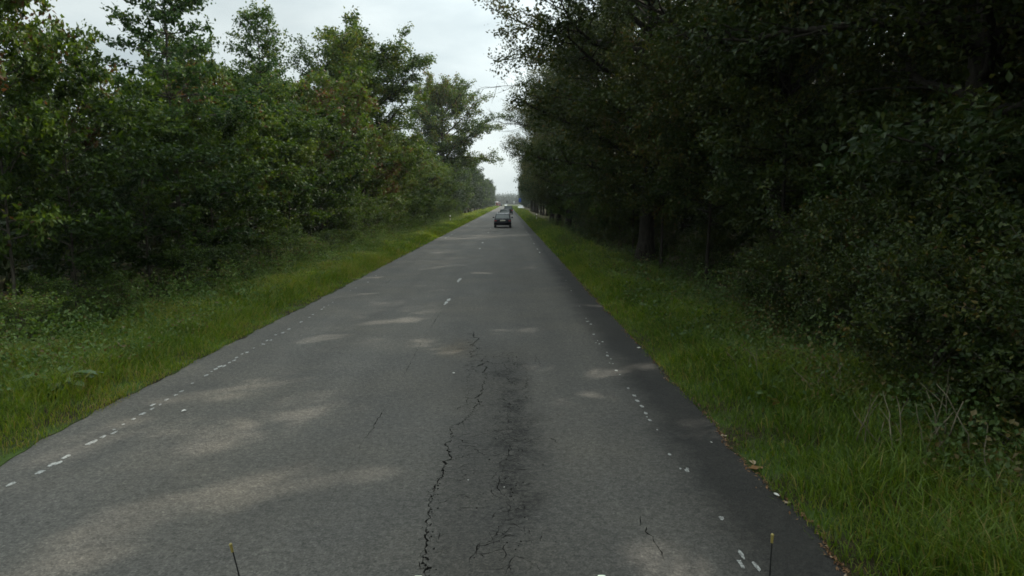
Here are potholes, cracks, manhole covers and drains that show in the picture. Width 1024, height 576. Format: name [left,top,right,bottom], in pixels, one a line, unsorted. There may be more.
crack [412,333,568,576]
